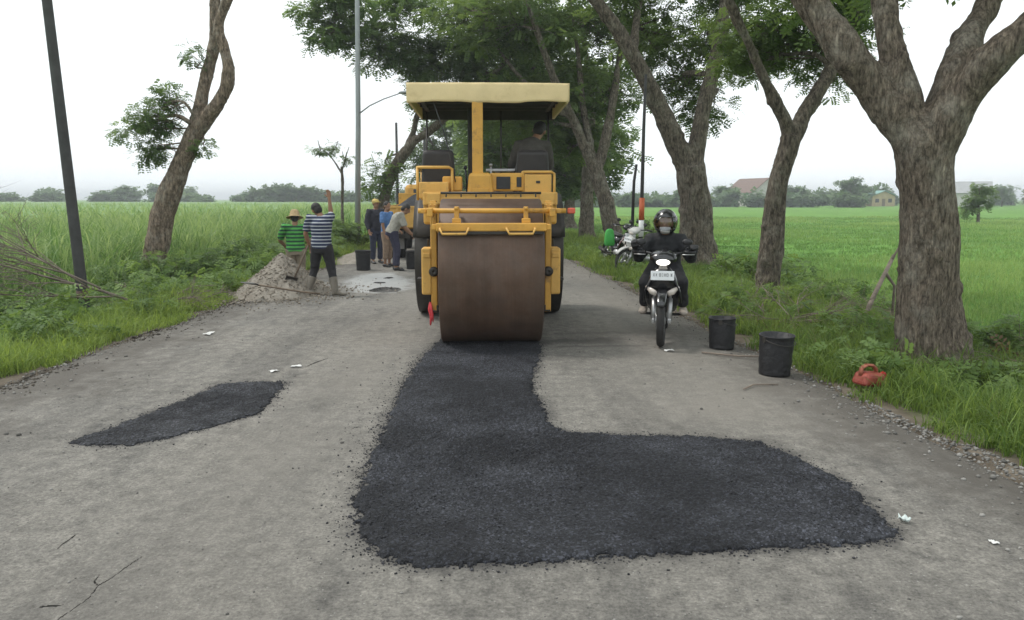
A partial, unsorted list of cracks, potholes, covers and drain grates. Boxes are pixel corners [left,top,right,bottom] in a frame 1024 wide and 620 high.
crack [41,557,141,620]
